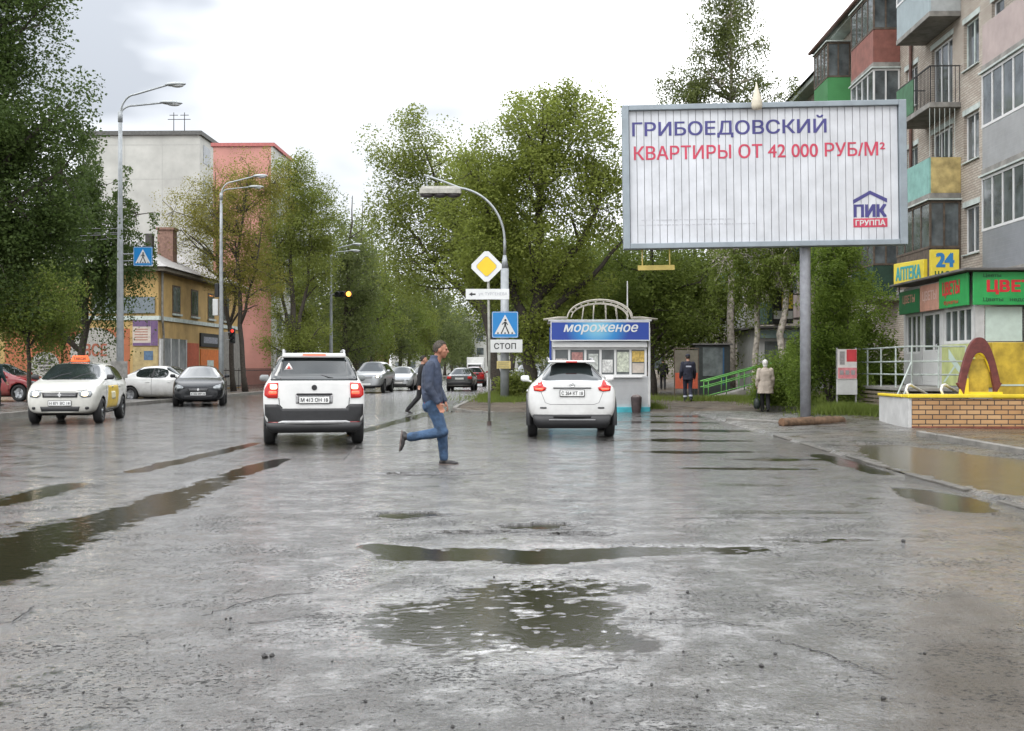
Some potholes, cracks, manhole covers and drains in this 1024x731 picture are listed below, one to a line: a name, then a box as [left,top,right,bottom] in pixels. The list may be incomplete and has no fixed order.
crack [654,619,898,679]
pothole [360,510,472,520]
crack [202,592,332,623]
pothole [483,520,586,532]
crack [0,606,35,623]
